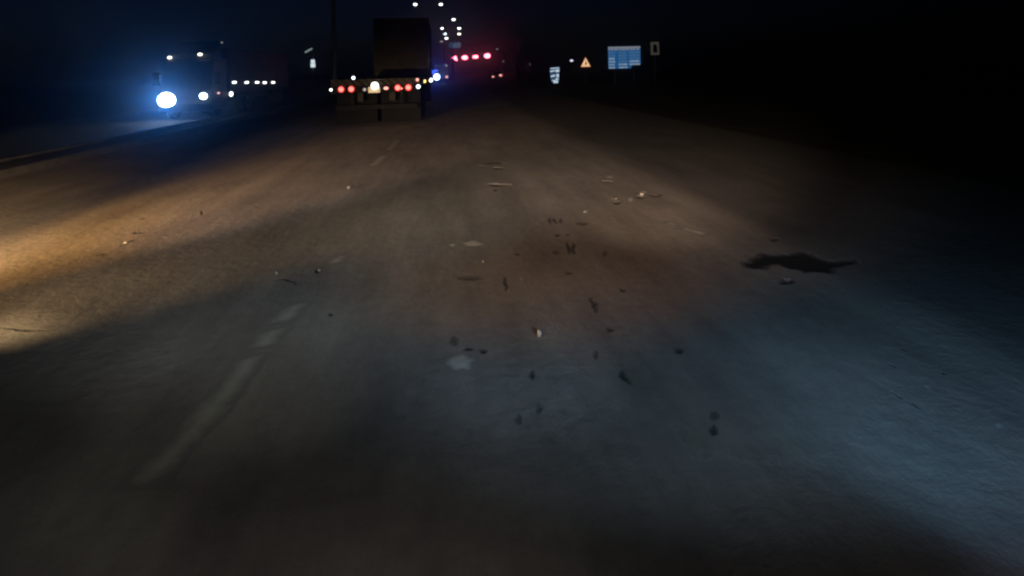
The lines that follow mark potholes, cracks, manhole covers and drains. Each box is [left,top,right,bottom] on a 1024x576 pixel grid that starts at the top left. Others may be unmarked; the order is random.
pothole [739,250,864,274]
